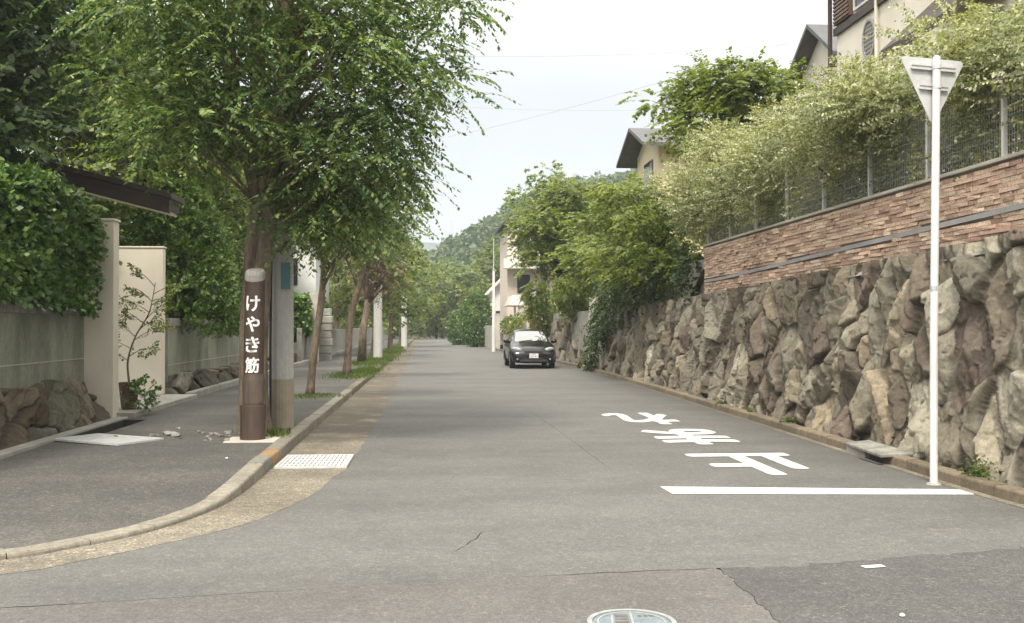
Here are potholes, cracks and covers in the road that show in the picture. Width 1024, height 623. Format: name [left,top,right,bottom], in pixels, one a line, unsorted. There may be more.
drain grate [274,454,354,469]
manhole cover [587,609,677,623]
drain grate [845,440,914,464]
